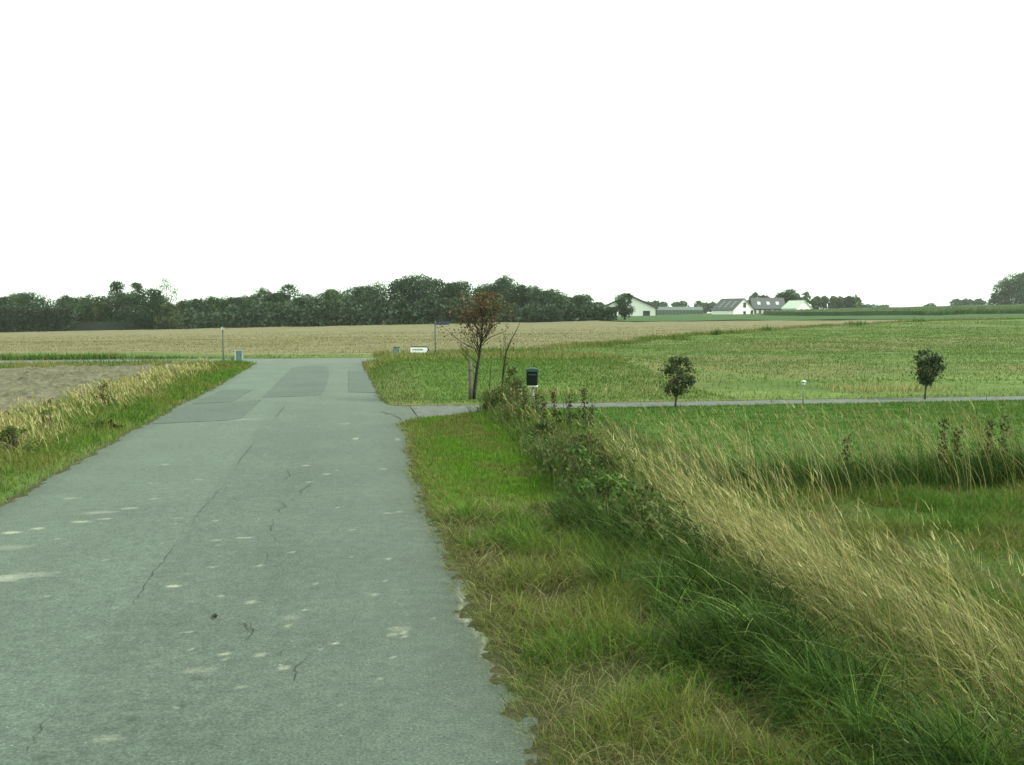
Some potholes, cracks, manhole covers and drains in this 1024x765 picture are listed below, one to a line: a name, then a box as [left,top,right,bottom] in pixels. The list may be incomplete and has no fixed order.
crack [242,470,321,686]
